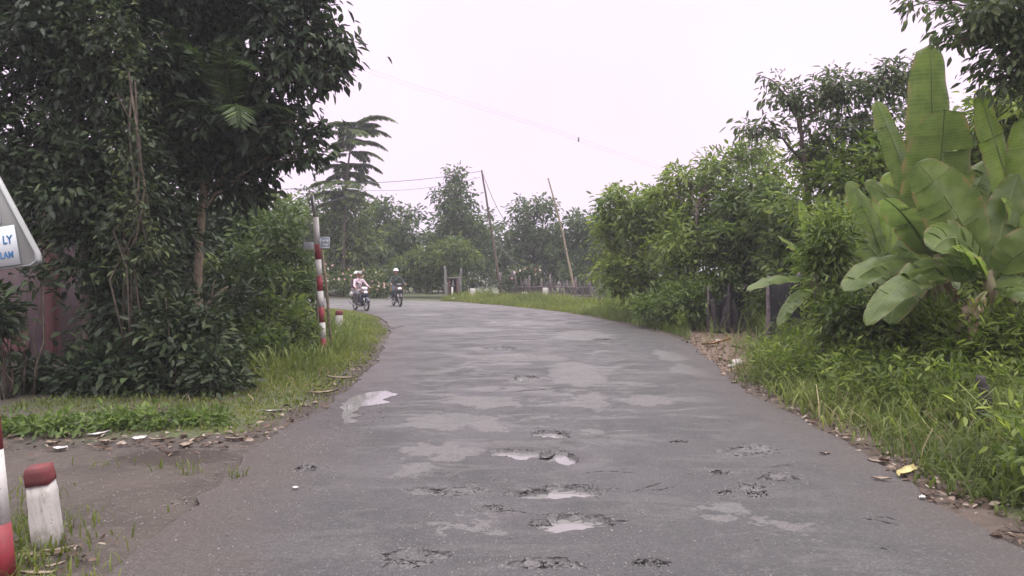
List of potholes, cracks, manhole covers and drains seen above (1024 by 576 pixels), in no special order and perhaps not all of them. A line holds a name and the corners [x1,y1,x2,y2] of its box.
pothole [527,512,628,533]
pothole [631,558,673,567]
pothole [715,444,784,457]
pothole [378,547,453,569]
pothole [753,471,800,482]
pothole [537,450,581,465]
pothole [732,482,769,499]
pothole [501,484,615,499]
pothole [401,486,494,498]
pothole [528,429,570,438]
pothole [498,556,587,571]
pothole [485,448,555,460]
